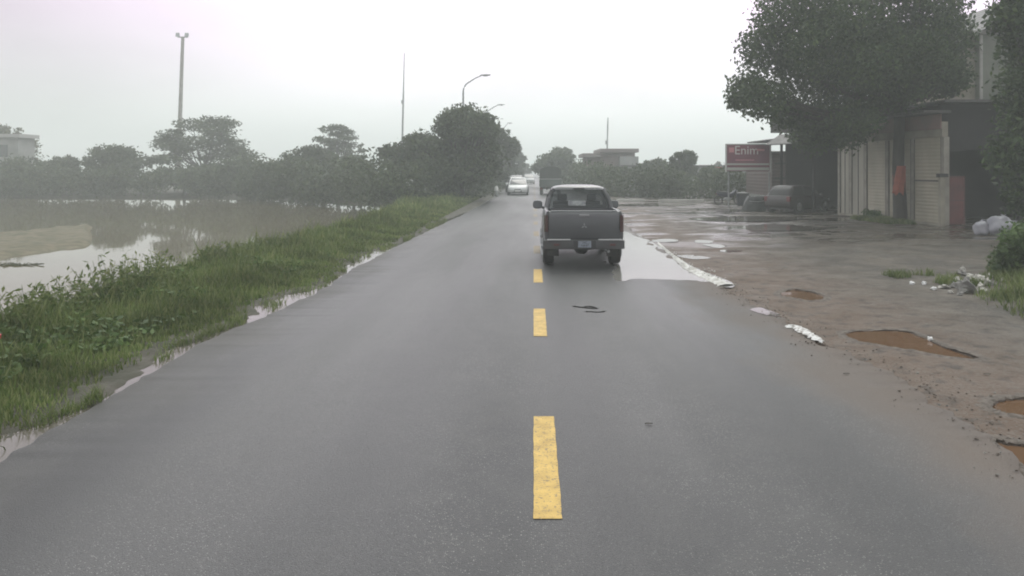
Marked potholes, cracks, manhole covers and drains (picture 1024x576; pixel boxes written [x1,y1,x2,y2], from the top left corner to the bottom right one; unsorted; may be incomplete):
pothole [773,287,833,302]
pothole [990,434,1024,476]
pothole [975,393,1024,419]
pothole [836,328,992,362]
